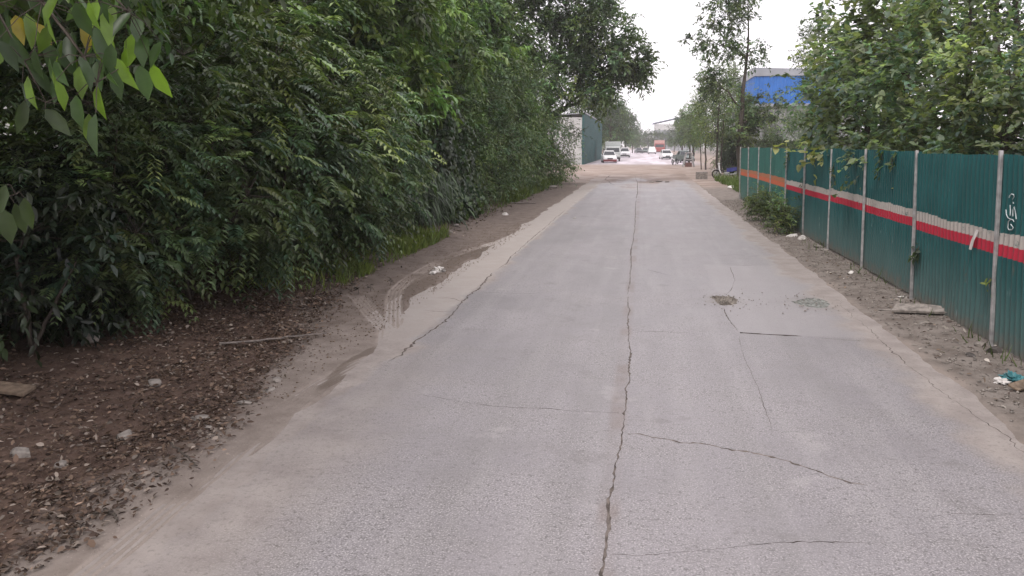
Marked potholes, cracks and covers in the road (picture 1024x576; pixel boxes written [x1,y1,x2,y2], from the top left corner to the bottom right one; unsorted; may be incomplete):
crack [392,214,561,360]
crack [635,433,864,485]
crack [623,513,994,556]
crack [722,255,797,432]
pothole [710,296,738,305]
crack [827,302,1021,451]
